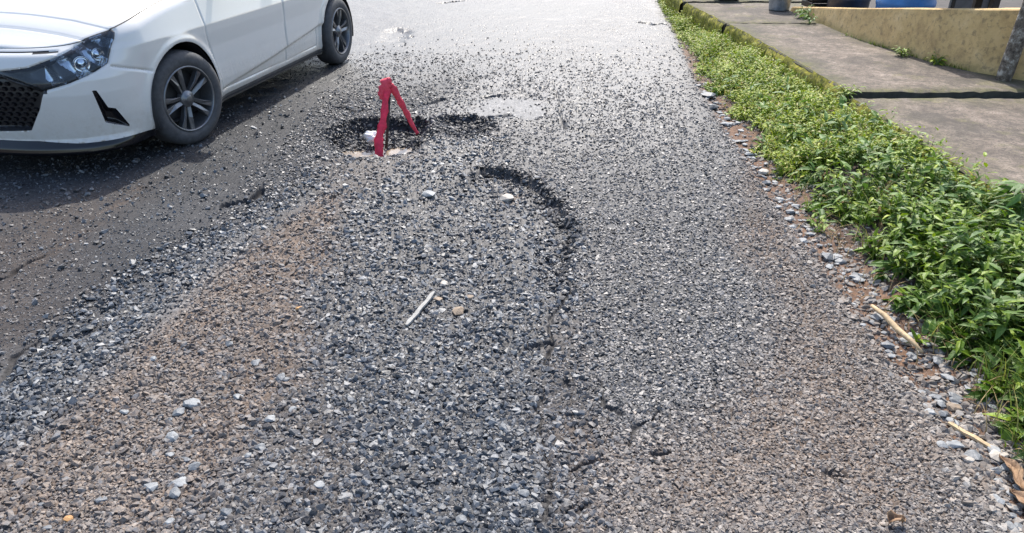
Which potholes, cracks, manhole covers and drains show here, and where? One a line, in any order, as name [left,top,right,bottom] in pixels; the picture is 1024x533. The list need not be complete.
crack [0,255,45,281]
crack [219,187,277,209]
pothole [437,116,496,145]
crack [523,309,560,351]
pothole [317,117,434,158]
crack [535,398,602,523]
